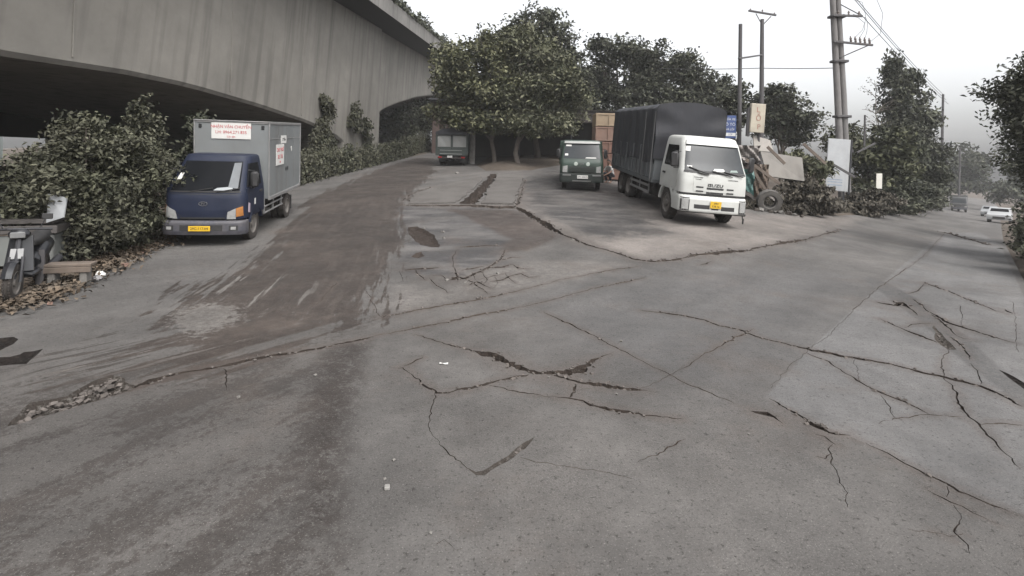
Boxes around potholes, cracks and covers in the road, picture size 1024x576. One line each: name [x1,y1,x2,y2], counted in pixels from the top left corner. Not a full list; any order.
crack [134,229,1021,554]
pothole [407,226,440,247]
pothole [8,375,139,426]
